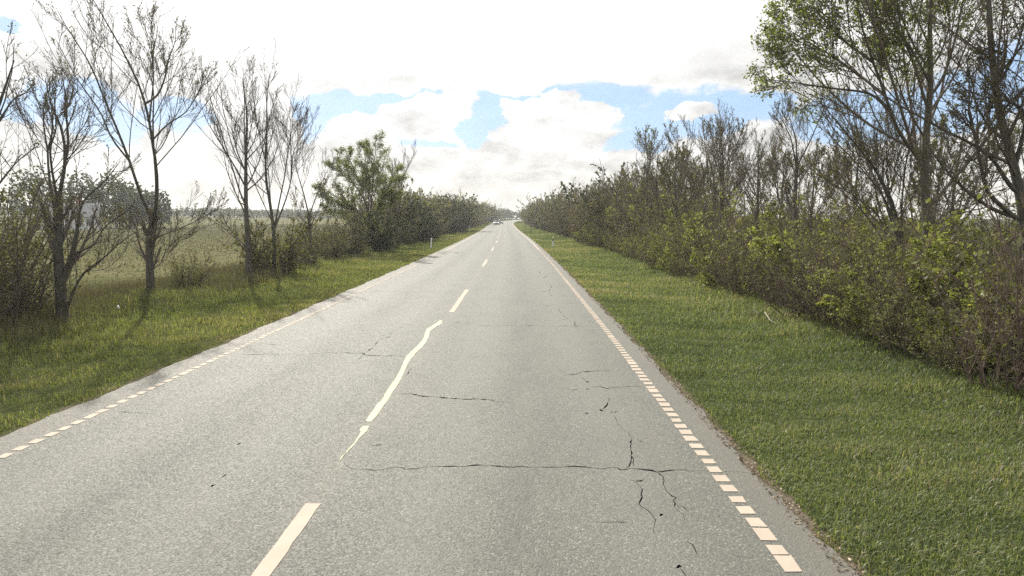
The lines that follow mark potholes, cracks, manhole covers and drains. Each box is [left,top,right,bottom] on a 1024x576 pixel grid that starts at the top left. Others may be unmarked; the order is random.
crack [344,371,746,533]
crack [242,329,411,376]
